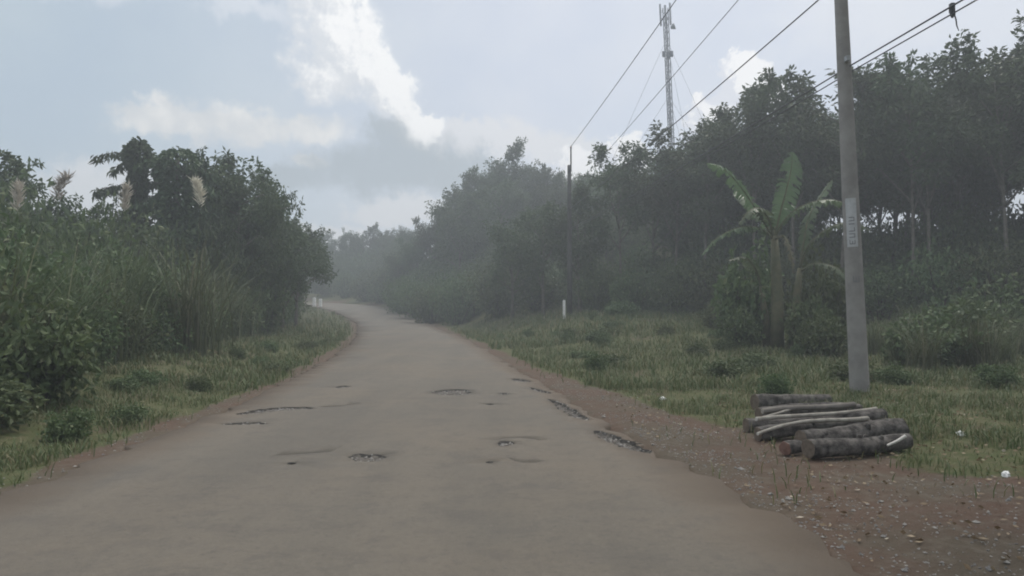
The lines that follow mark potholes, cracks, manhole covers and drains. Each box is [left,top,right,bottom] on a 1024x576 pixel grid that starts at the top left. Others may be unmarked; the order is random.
pothole [348,454,386,462]
pothole [237,407,314,415]
pothole [547,399,589,420]
pothole [593,431,652,453]
